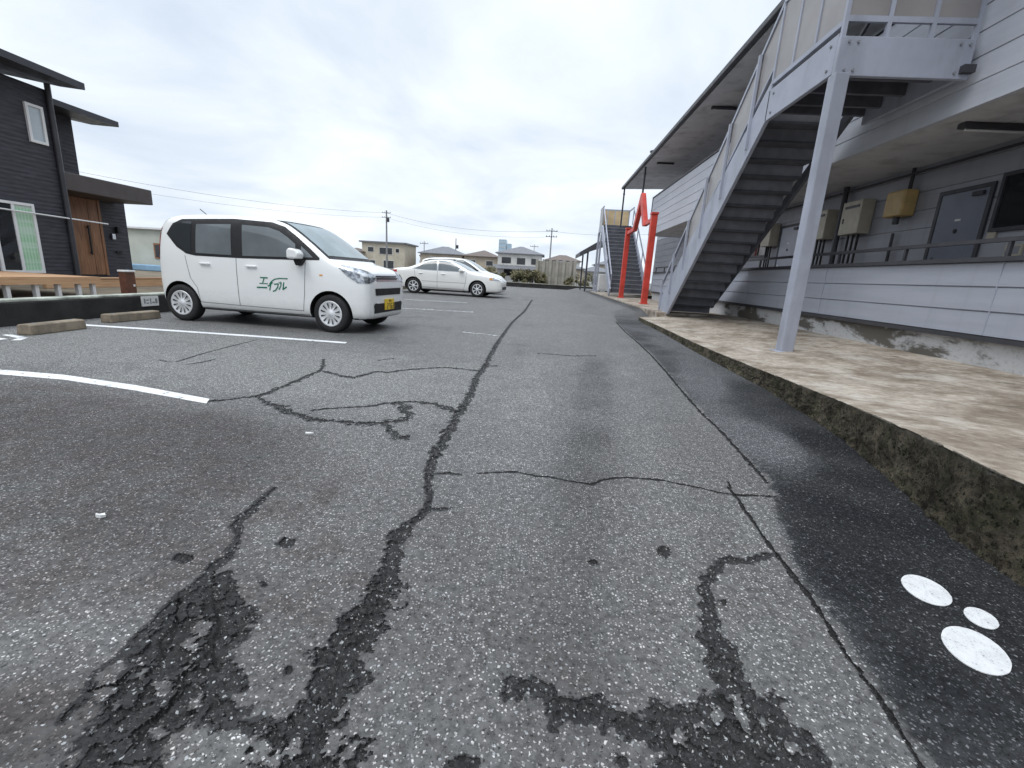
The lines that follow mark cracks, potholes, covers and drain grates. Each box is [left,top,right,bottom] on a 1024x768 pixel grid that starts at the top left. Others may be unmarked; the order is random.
pothole [278,537,296,548]
pothole [172,553,193,563]
crack [60,300,925,768]
